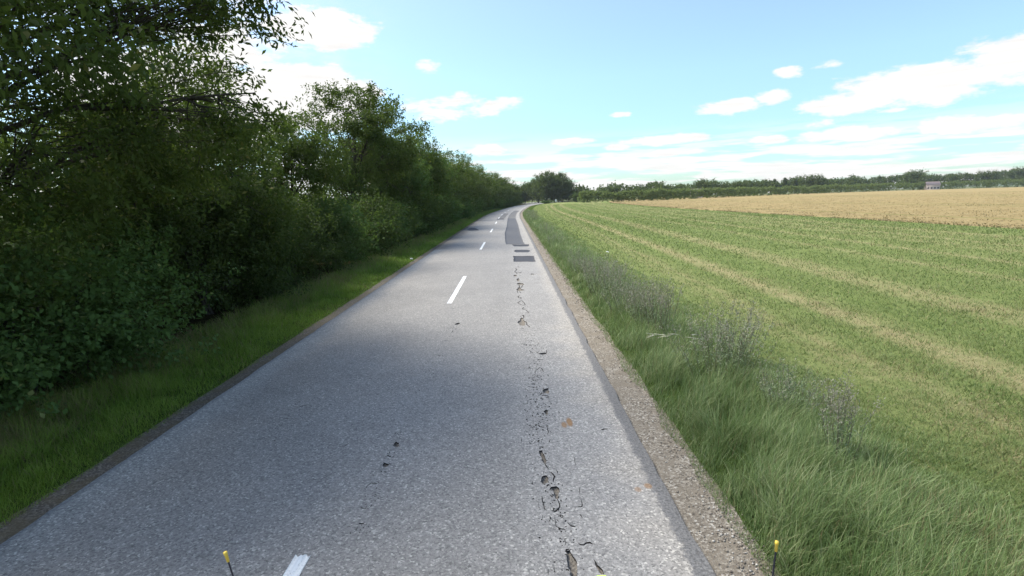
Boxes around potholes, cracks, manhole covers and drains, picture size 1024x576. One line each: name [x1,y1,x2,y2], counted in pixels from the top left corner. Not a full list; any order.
crack [521,439,595,573]
crack [515,266,559,442]
pothole [566,551,577,576]
